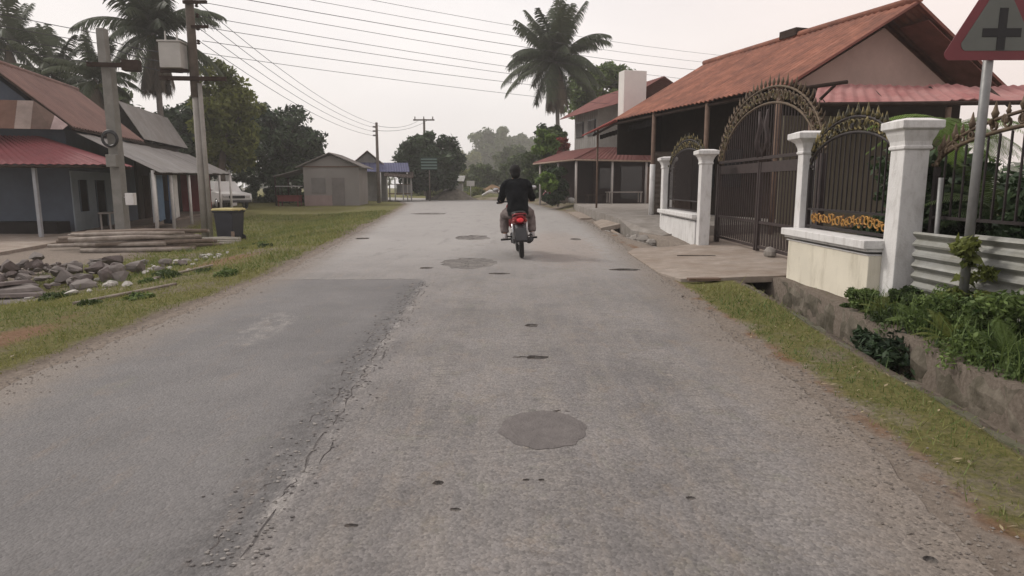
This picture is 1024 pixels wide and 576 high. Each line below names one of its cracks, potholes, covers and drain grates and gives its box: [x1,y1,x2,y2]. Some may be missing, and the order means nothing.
crack [186,282,430,567]
